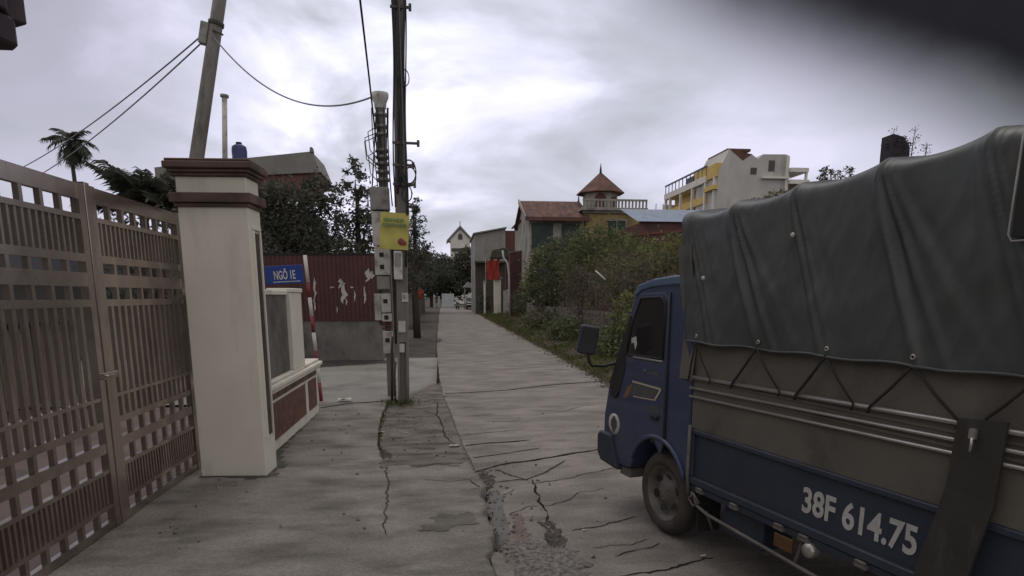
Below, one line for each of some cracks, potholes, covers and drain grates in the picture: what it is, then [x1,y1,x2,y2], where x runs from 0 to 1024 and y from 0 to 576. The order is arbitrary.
crack [377,405,390,535]
crack [413,402,636,553]
pothole [478,471,495,491]
crack [594,539,713,576]
